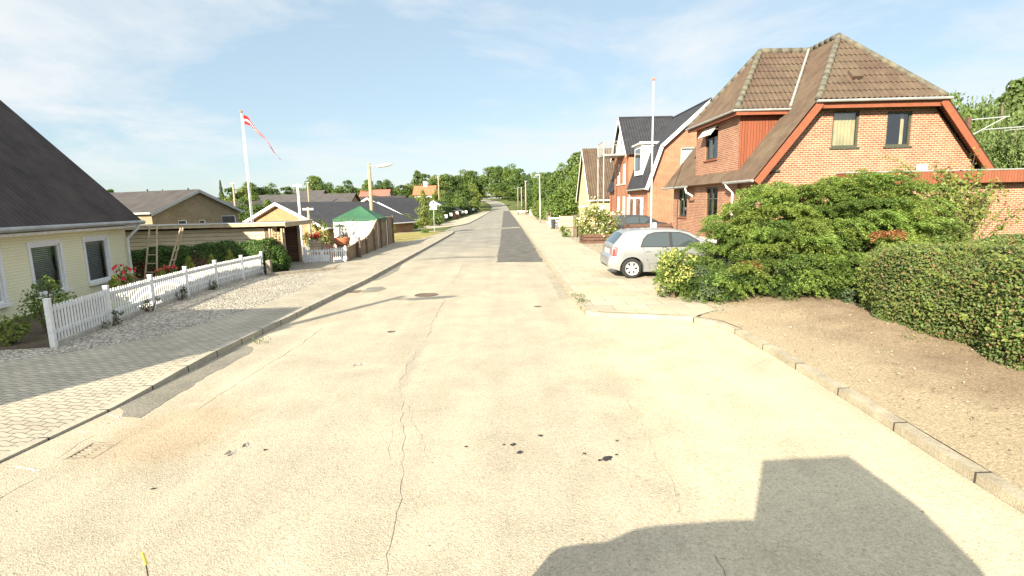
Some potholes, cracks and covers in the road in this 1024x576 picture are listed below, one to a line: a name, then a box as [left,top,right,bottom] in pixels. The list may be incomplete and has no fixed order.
drain grate [63,442,119,460]
crack [386,352,429,576]
